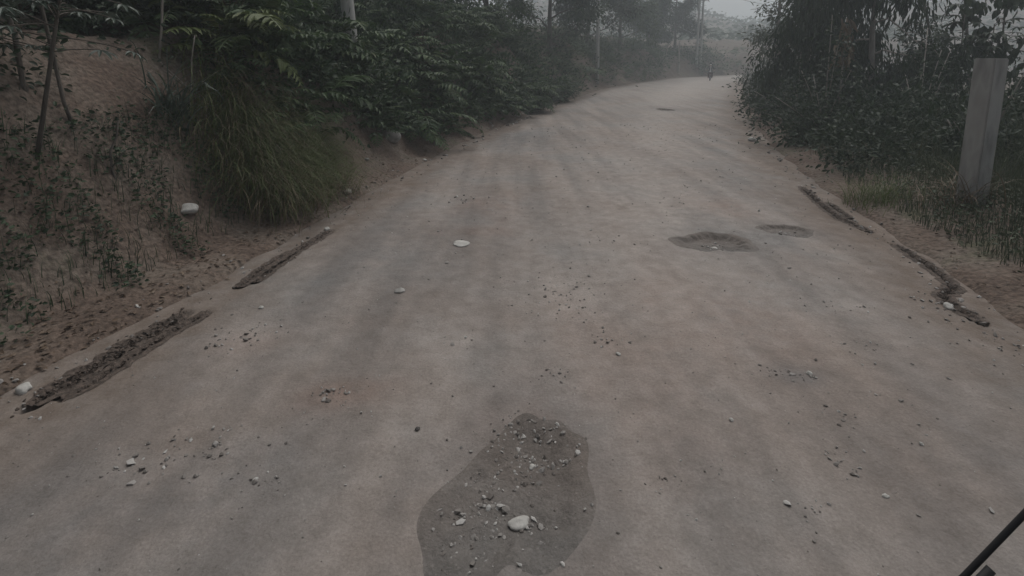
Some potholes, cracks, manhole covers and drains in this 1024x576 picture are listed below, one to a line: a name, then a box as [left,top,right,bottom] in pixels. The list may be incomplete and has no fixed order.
pothole [755,224,814,238]
pothole [668,232,759,252]
pothole [417,413,596,576]
